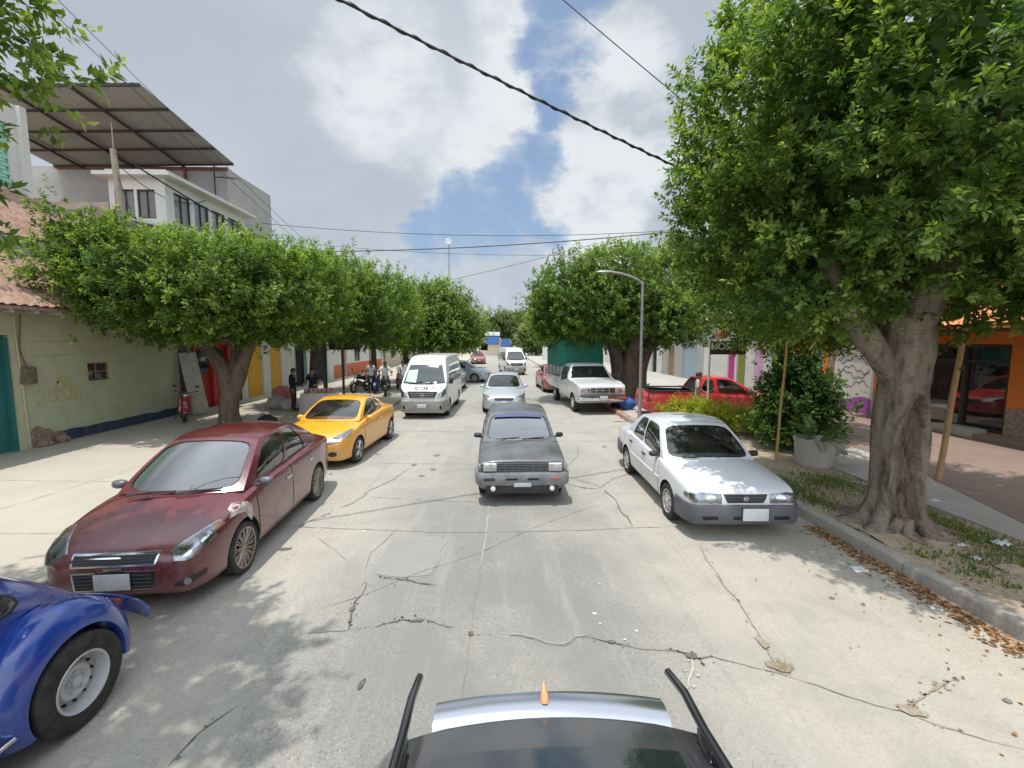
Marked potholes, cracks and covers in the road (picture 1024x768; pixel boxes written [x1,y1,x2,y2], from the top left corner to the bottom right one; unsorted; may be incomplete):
crack [569,452,633,526]
crack [490,545,1020,748]
crack [313,531,456,639]
crack [171,708,245,762]
crack [302,471,471,525]
